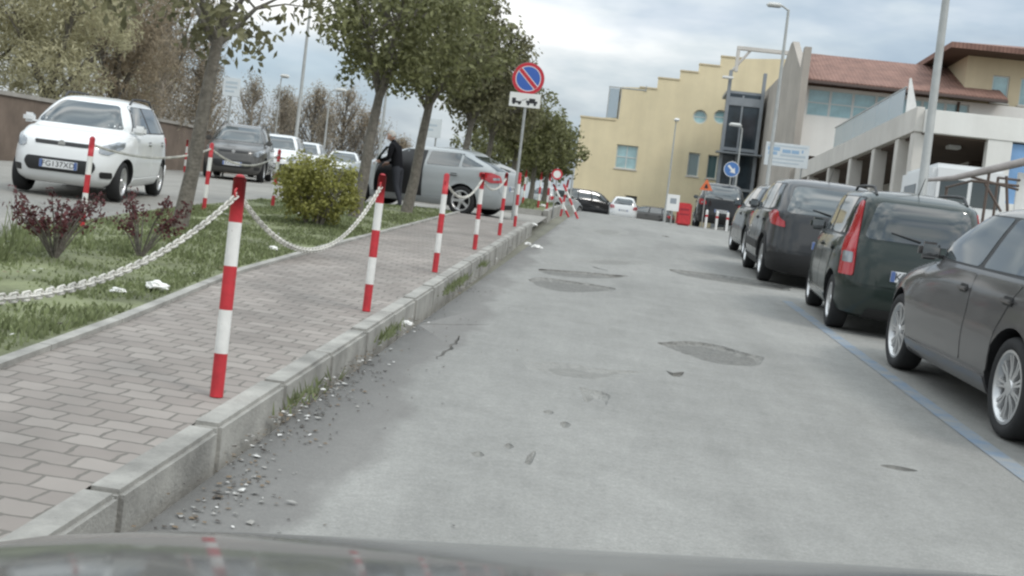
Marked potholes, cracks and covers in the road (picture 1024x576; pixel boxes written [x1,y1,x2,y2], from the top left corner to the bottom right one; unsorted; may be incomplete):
pothole [670,269,791,291]
pothole [657,341,764,366]
pothole [579,387,611,405]
pothole [529,277,615,292]
pothole [539,269,627,278]
crack [418,324,483,359]
